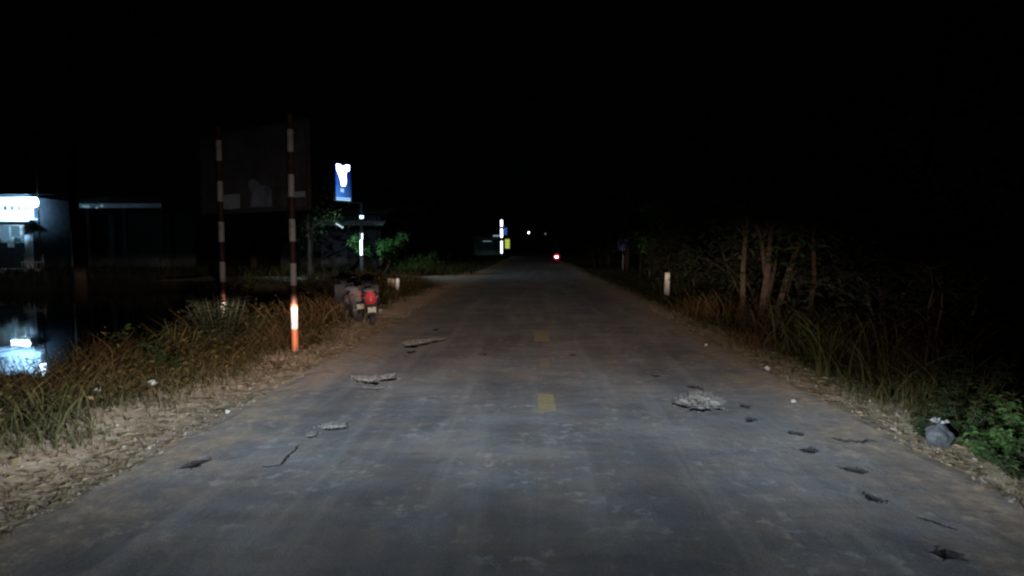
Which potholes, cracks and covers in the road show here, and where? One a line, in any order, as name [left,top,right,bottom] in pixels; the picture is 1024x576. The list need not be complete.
crack [917,517,956,530]
crack [263,443,303,467]
pothole [926,545,970,562]
pothole [862,491,888,504]
pothole [836,466,872,475]
pothole [174,457,220,471]
